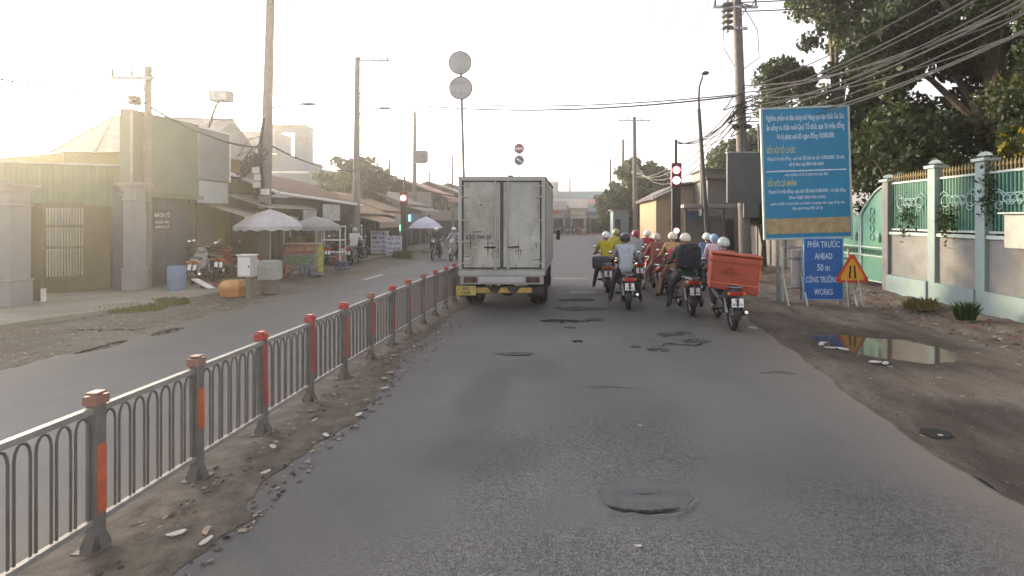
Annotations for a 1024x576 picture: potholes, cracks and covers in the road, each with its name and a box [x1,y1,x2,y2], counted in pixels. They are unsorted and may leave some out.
pothole [919,428,953,439]
pothole [599,475,693,514]
